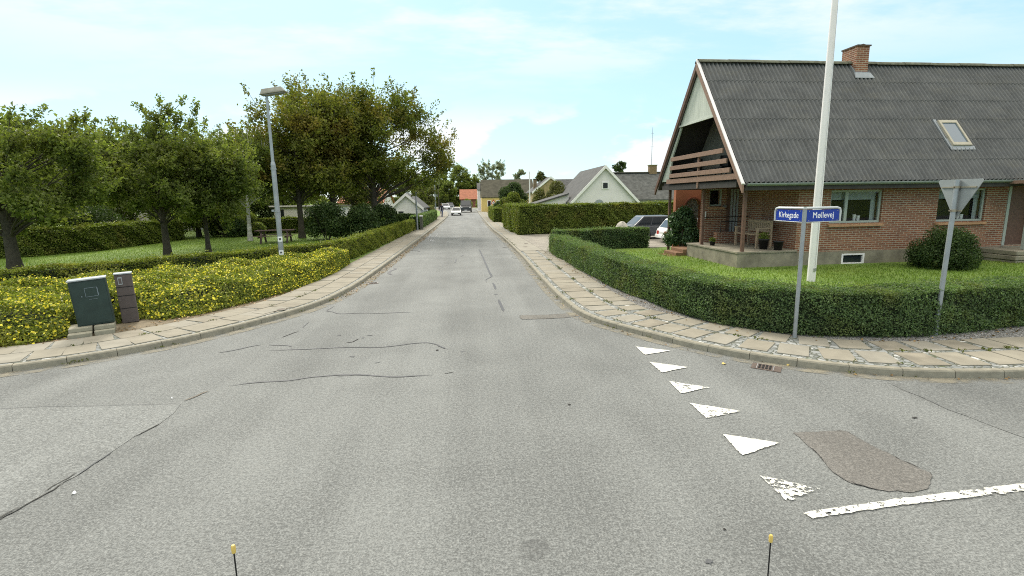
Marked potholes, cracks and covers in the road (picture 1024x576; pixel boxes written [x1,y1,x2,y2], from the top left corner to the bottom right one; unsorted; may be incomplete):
drain grate [751,362,782,373]
